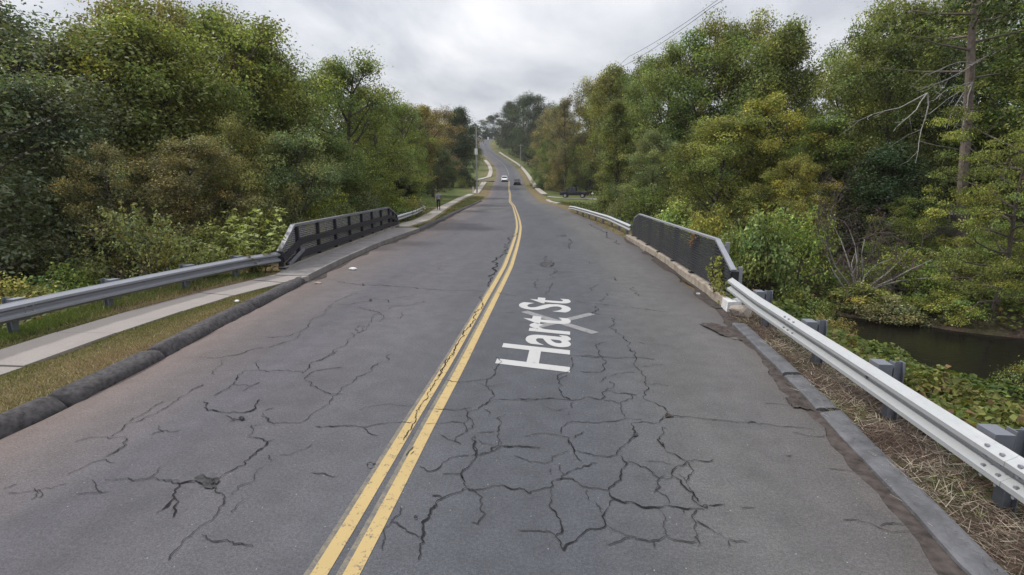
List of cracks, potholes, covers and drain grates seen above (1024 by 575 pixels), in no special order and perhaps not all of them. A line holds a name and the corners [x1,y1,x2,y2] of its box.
pothole [194,474,220,489]
crack [844,519,916,532]
crack [0,276,823,561]
